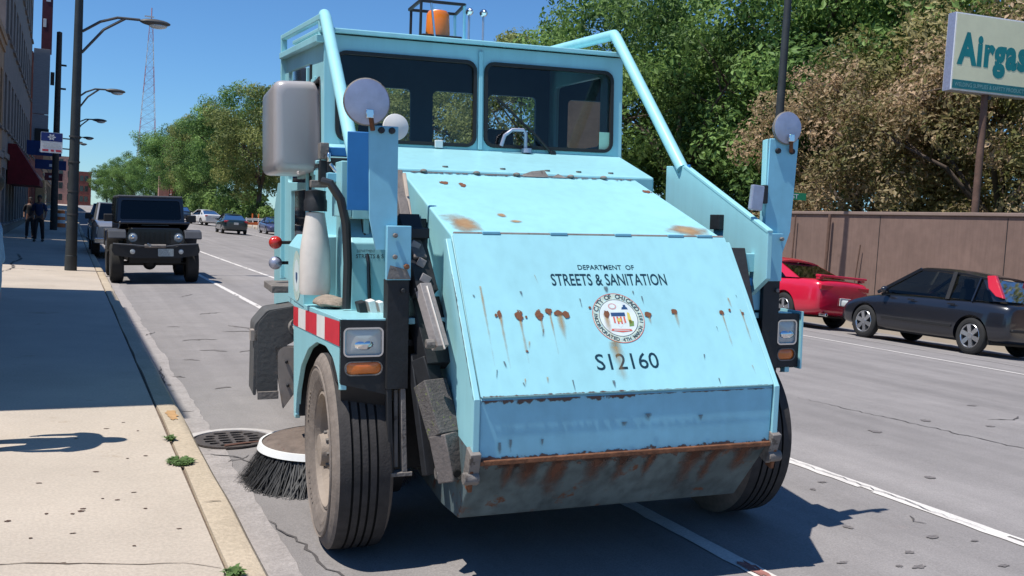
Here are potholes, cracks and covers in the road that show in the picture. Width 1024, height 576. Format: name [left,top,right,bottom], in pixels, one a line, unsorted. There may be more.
crack [798,397,1023,448]
drain grate [192,428,274,449]
